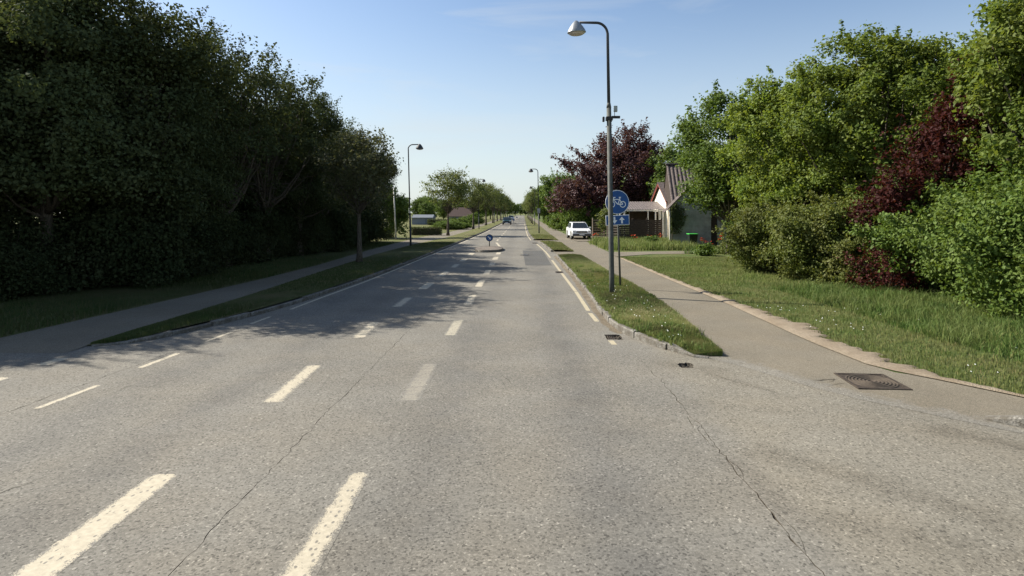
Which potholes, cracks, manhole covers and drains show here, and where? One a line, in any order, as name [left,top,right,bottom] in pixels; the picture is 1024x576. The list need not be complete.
crack [647,366,825,576]
crack [168,291,448,576]
